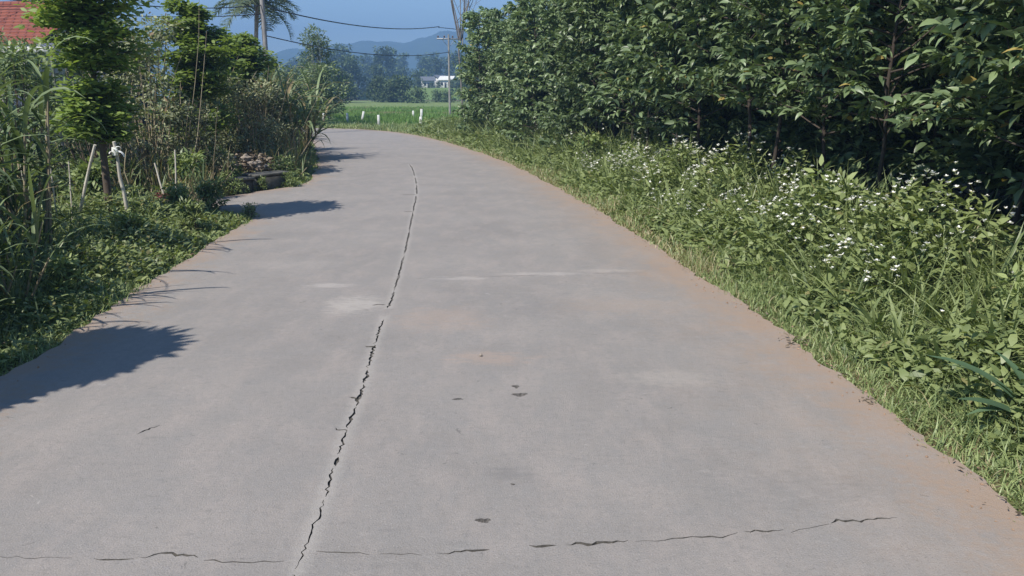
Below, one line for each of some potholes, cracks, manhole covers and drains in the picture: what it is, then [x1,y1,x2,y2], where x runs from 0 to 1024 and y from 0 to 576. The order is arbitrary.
crack [294,165,897,576]
crack [0,552,281,563]
